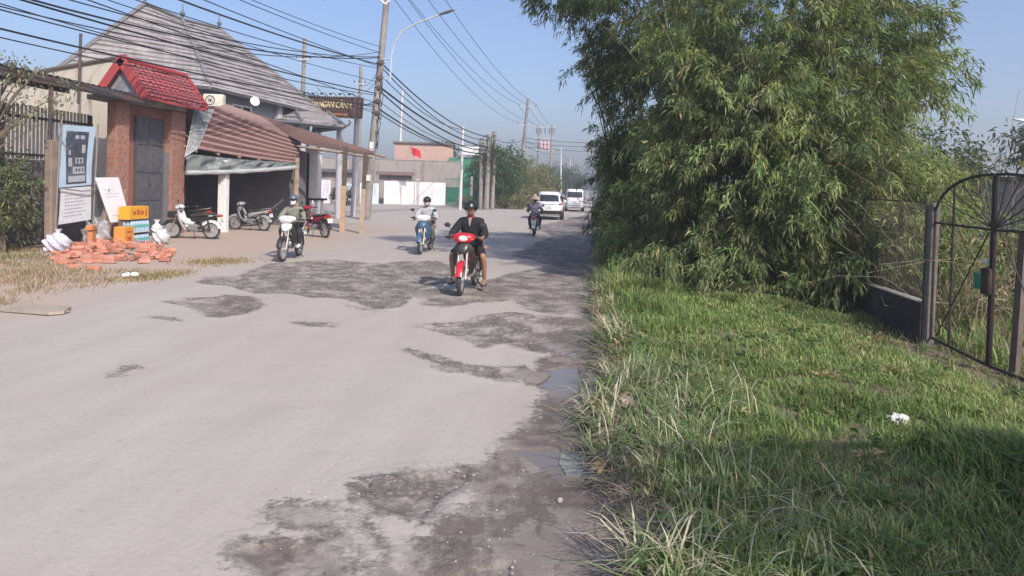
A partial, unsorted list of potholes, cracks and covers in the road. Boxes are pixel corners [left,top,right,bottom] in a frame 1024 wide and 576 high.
pothole [405,311,597,356]
pothole [392,346,551,386]
pothole [278,319,349,329]
pothole [501,362,596,403]
pothole [155,294,275,320]
pothole [189,259,456,311]
